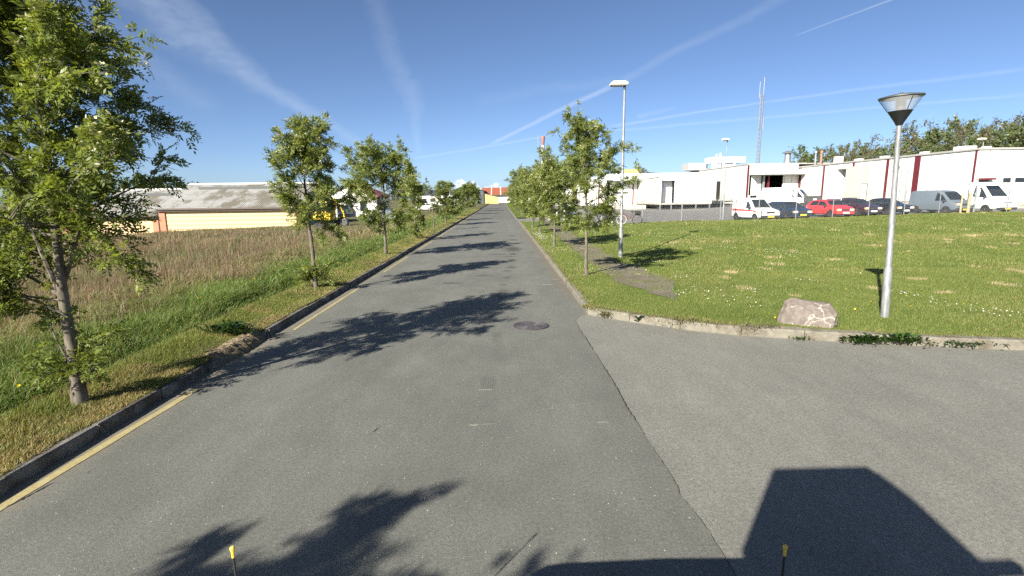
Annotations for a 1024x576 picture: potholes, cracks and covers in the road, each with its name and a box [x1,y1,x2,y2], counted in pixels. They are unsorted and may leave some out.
manhole cover [514,321,549,330]
